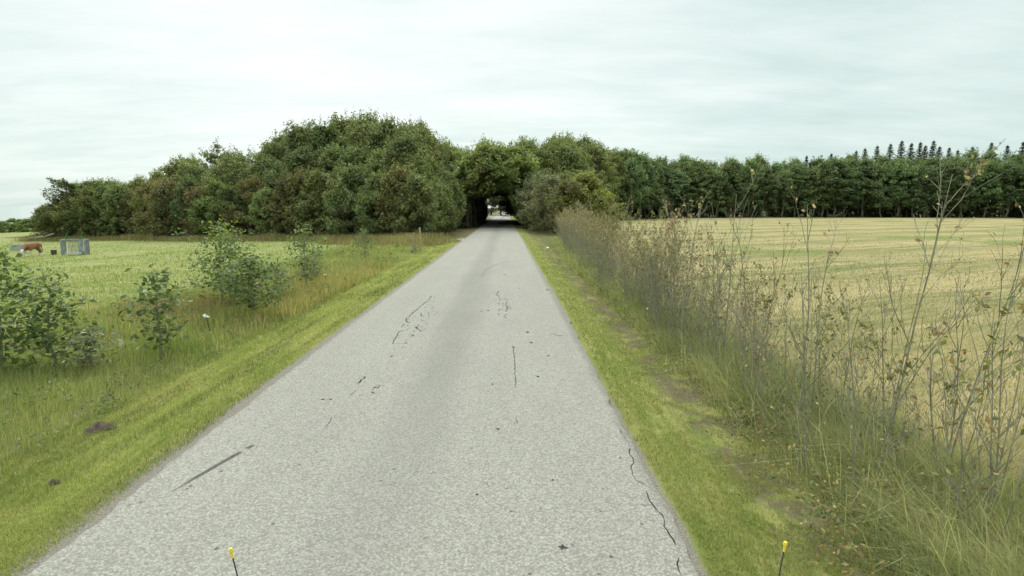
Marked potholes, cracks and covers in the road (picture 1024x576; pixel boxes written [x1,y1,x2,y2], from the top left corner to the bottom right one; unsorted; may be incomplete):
crack [619,429,682,576]
crack [392,296,439,348]
